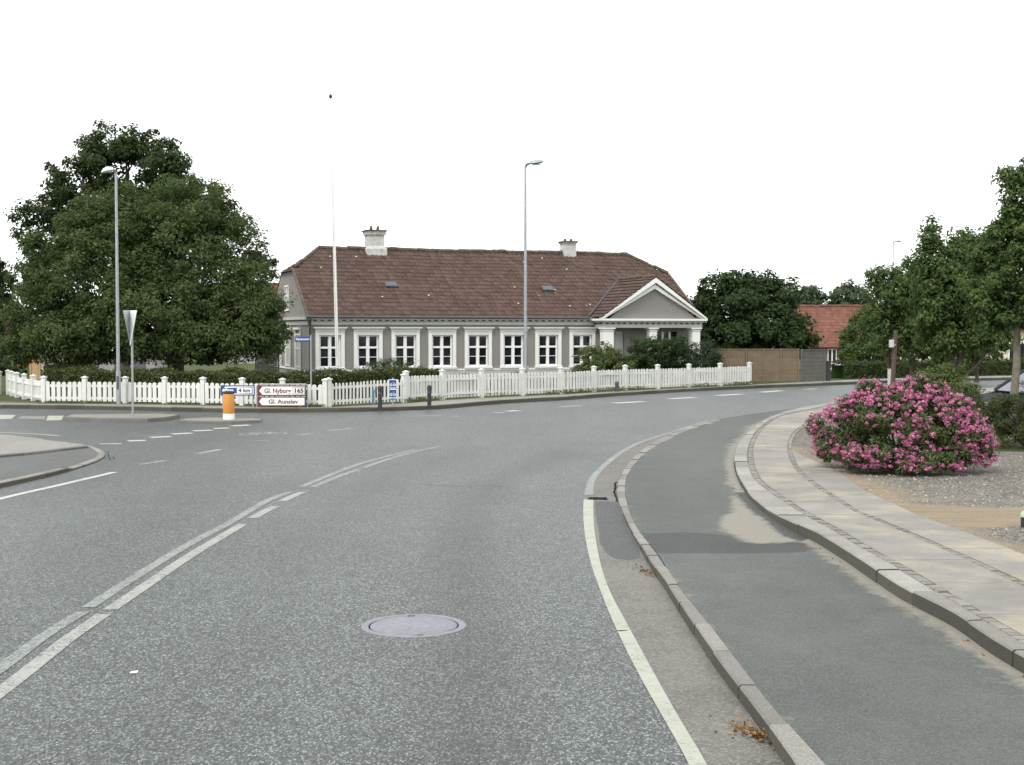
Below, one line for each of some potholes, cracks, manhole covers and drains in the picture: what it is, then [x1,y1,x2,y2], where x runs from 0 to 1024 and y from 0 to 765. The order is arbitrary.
manhole cover [361,614,466,638]
